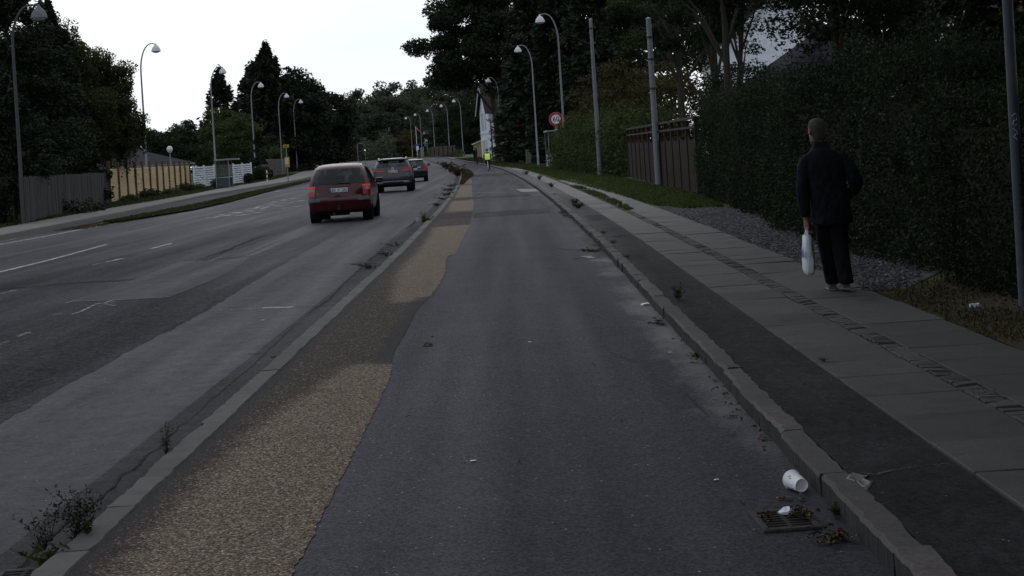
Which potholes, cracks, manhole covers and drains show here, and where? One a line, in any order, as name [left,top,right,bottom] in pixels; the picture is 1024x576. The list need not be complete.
drain grate [749,507,822,533]
